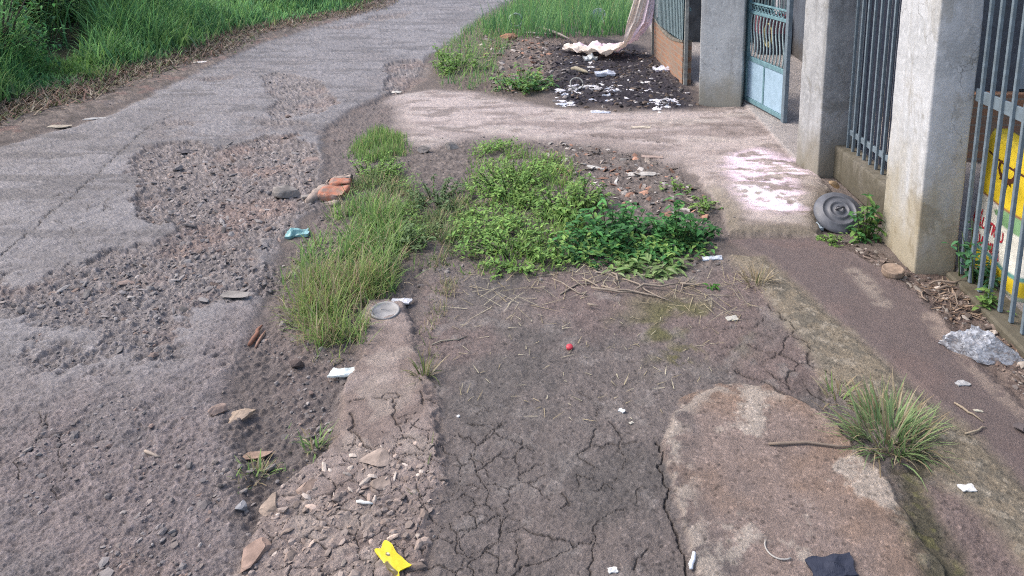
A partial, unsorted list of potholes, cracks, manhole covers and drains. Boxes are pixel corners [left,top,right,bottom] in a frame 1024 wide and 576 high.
crack [263,373,438,576]
pothole [256,72,342,120]
pothole [0,132,326,383]
crack [722,303,847,405]
pothole [381,58,432,96]
crack [405,392,688,576]
